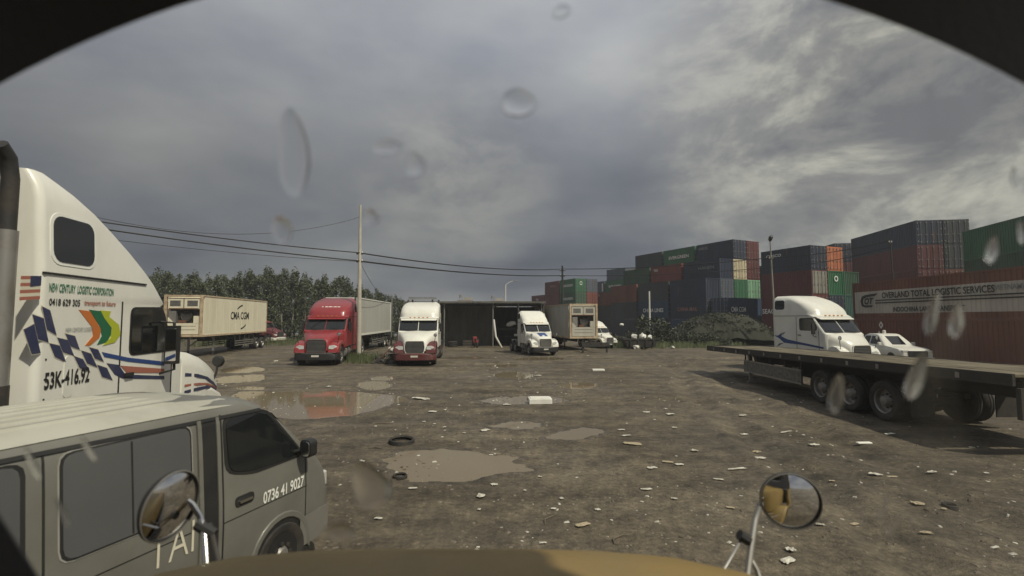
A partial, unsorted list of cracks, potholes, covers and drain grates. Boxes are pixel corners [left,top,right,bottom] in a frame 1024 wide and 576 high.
pothole [538,426,611,442]
pothole [482,420,548,431]
pothole [352,380,396,391]
pothole [374,446,543,487]
pothole [474,395,574,405]
pothole [227,390,414,421]
